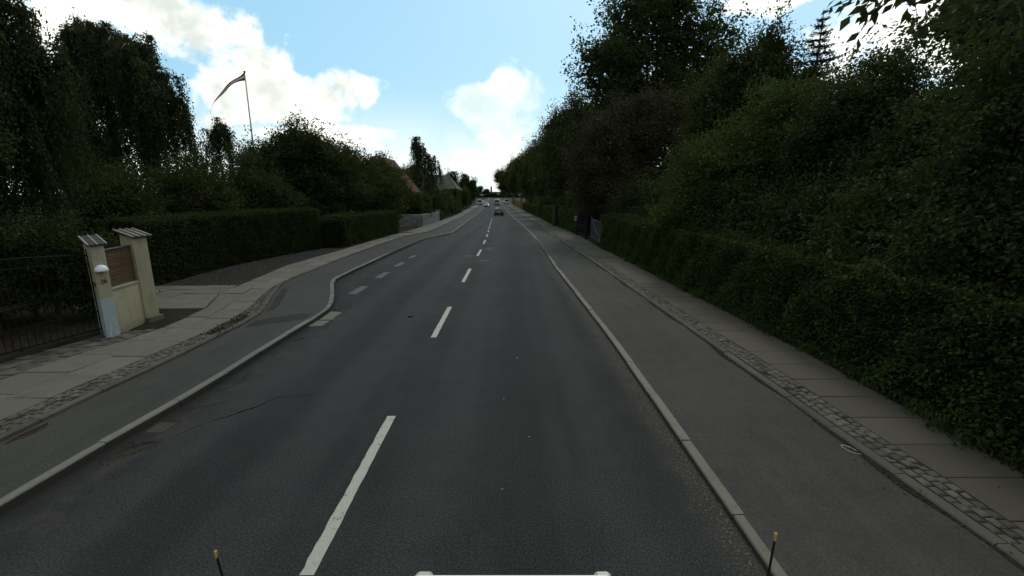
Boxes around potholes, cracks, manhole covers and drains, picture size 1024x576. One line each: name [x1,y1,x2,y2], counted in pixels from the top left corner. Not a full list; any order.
crack [182,373,322,433]
